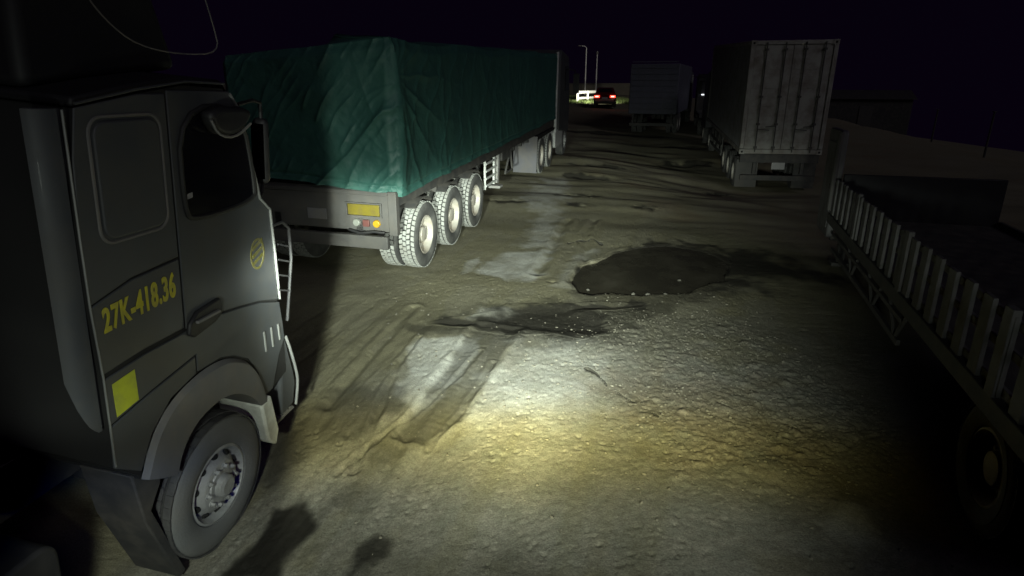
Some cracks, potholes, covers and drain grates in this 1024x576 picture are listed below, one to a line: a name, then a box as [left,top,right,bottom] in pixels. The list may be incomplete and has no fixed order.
pothole [425,301,652,340]
pothole [568,245,730,296]
crack [584,367,660,417]
